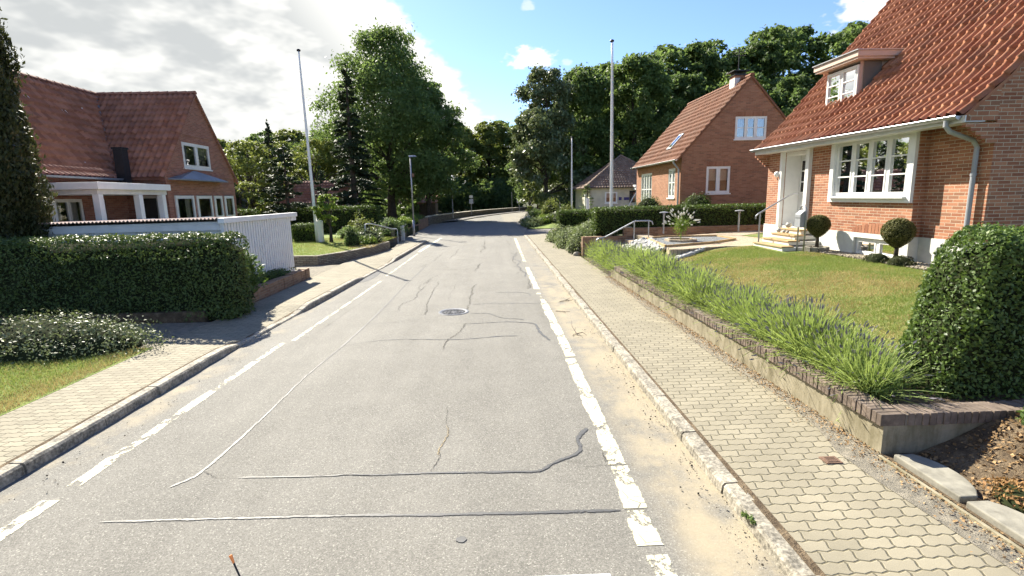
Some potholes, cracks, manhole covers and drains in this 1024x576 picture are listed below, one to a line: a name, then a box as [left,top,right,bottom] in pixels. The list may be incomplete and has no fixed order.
crack [388,241,486,317]
utility cover [818,456,843,464]
manhole cover [438,308,469,316]
